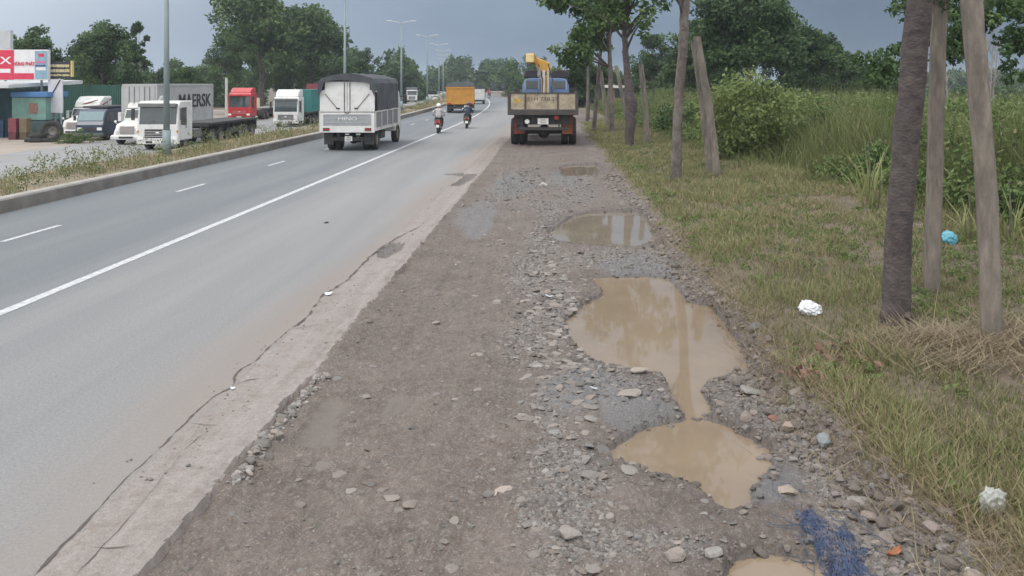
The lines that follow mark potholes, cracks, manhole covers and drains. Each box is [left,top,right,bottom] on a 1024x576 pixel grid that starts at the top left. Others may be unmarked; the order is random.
pothole [608,415,775,509]
pothole [546,208,656,246]
pothole [563,275,754,431]
pothole [560,164,602,176]
pothole [722,543,835,576]
